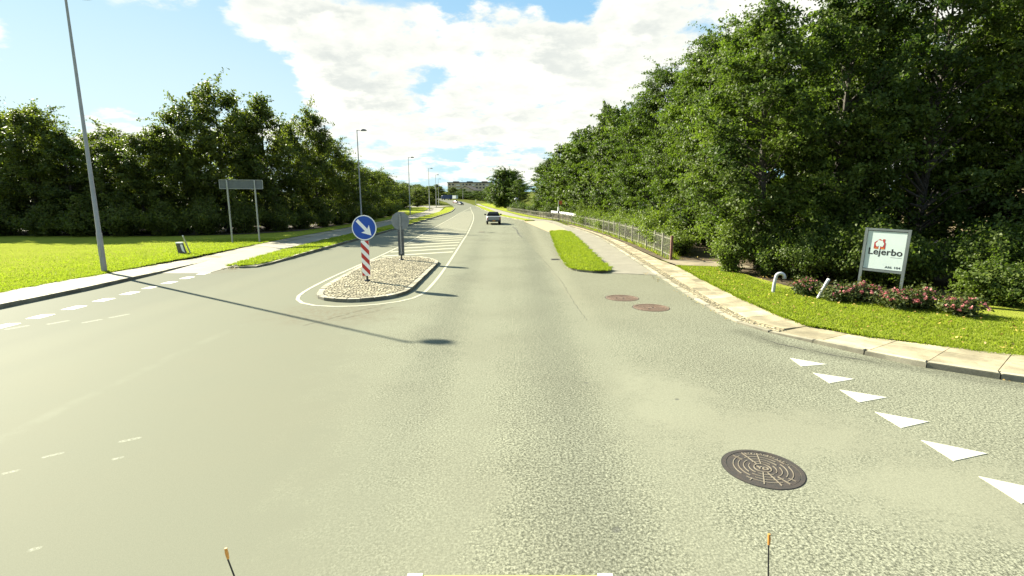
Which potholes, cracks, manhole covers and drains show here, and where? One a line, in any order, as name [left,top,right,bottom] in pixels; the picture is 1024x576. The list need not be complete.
manhole cover [721,450,807,490]
manhole cover [632,304,670,312]
